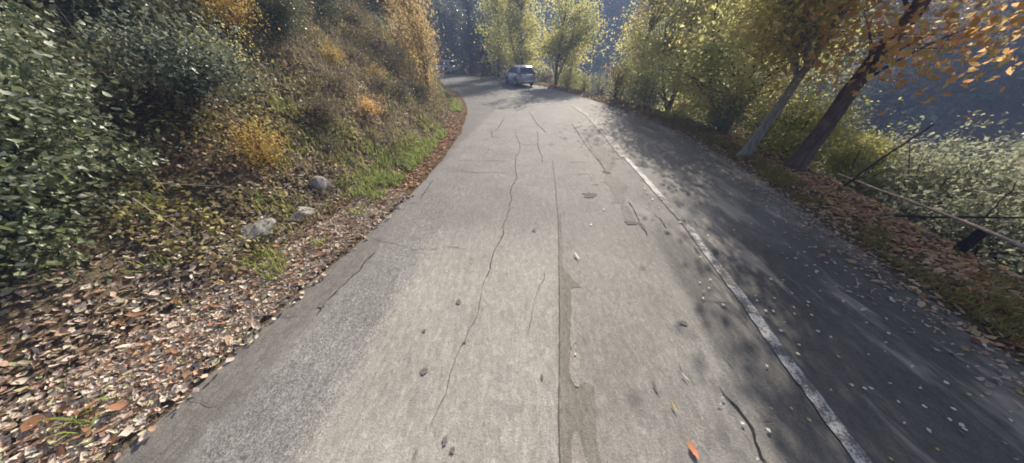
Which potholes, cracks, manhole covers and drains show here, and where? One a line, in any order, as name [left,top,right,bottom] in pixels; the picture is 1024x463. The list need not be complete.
crack [437,112,546,410]
crack [719,358,779,463]
